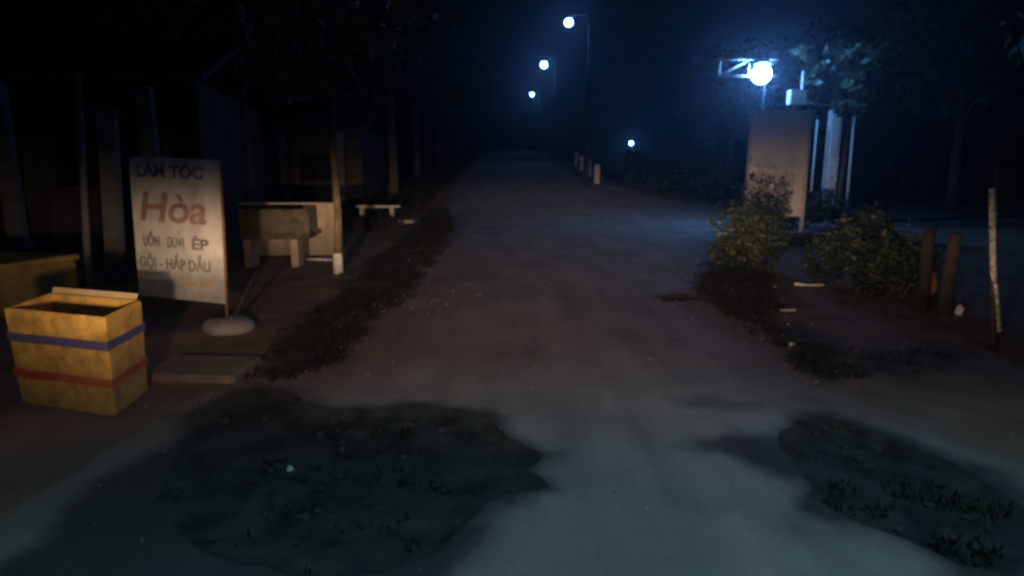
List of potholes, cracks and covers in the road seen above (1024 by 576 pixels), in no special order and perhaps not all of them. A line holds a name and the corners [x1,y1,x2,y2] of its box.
pothole [775,416,1024,576]
pothole [153,391,549,576]
pothole [654,294,706,302]
